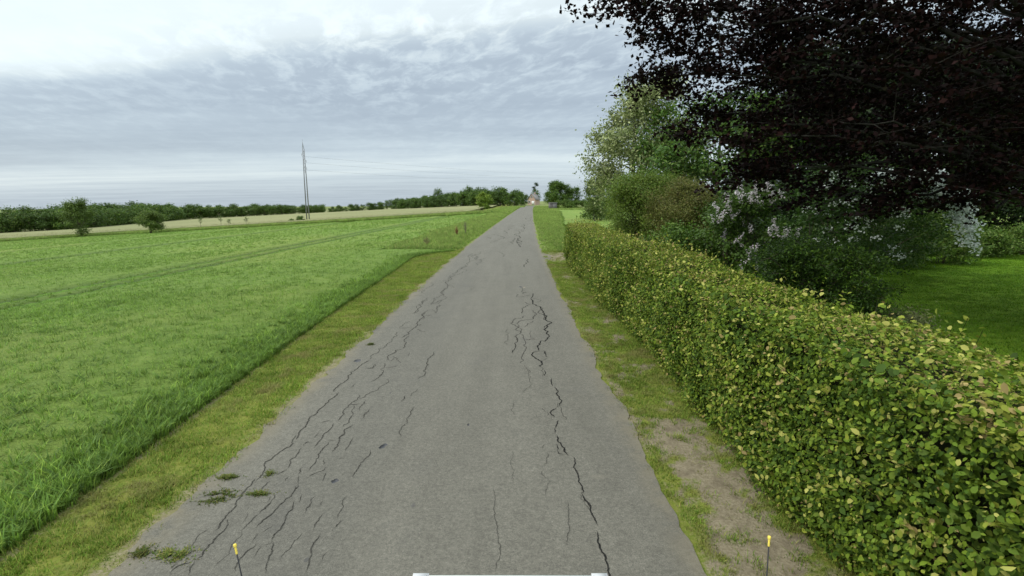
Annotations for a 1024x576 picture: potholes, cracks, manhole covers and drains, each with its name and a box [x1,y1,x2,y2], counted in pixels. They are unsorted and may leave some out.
crack [170,254,482,574]
crack [504,287,611,576]
